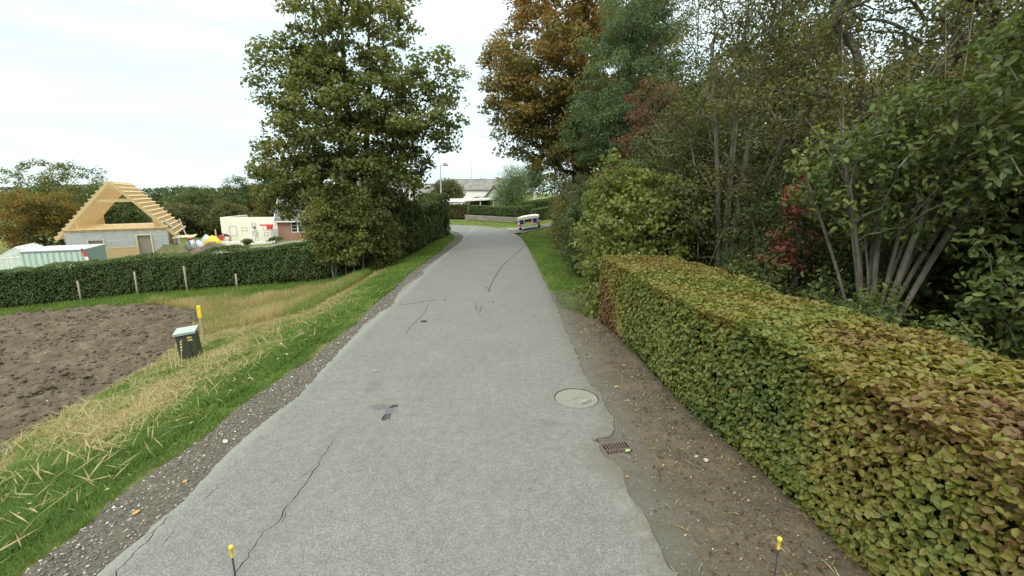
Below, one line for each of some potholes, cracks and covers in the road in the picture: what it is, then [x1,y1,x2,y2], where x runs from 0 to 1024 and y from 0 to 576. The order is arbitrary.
crack [236,439,334,572]
manhole cover [554,388,599,408]
drain grate [599,440,636,456]
